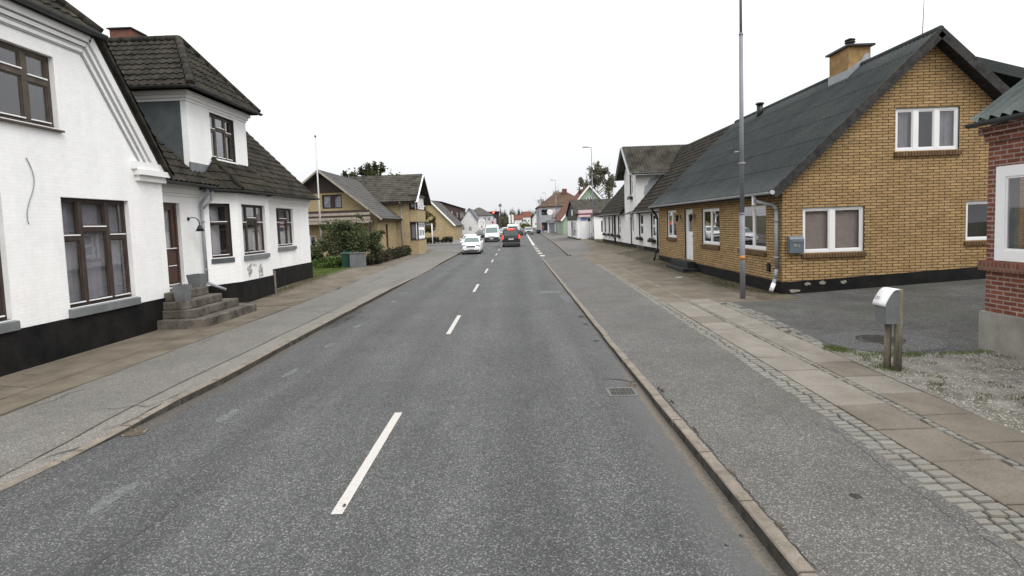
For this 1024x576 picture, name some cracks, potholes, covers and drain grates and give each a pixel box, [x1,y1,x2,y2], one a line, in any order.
drain grate [605,387,639,397]
